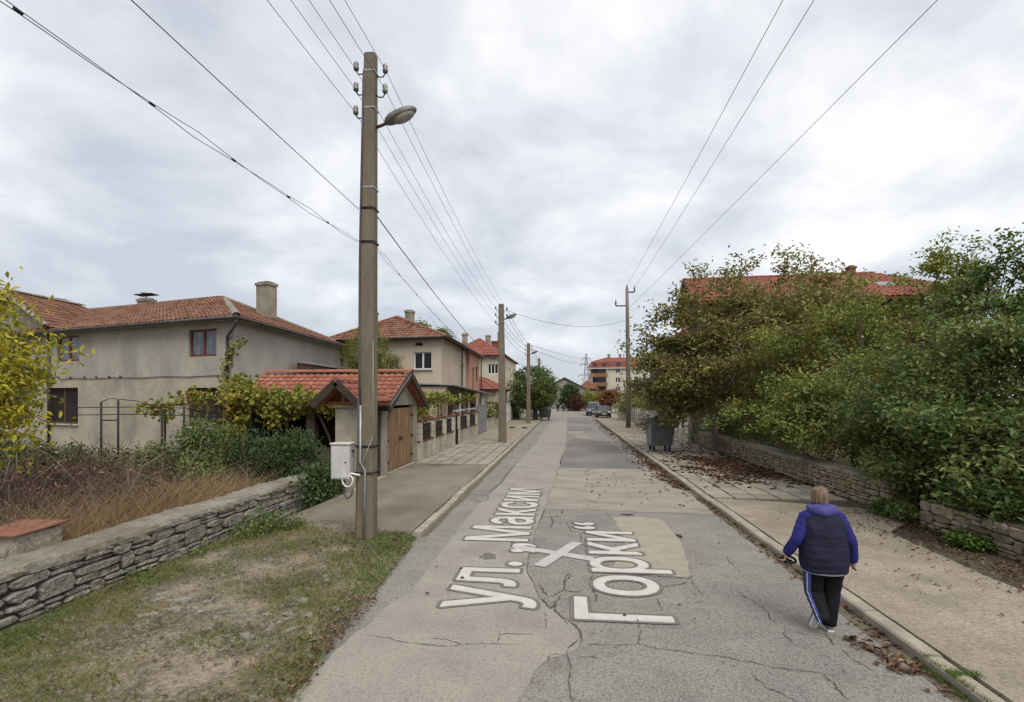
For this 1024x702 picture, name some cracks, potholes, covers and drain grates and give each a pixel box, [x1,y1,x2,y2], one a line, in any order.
crack [616,556,731,610]
crack [364,633,529,646]
crack [536,572,870,702]
